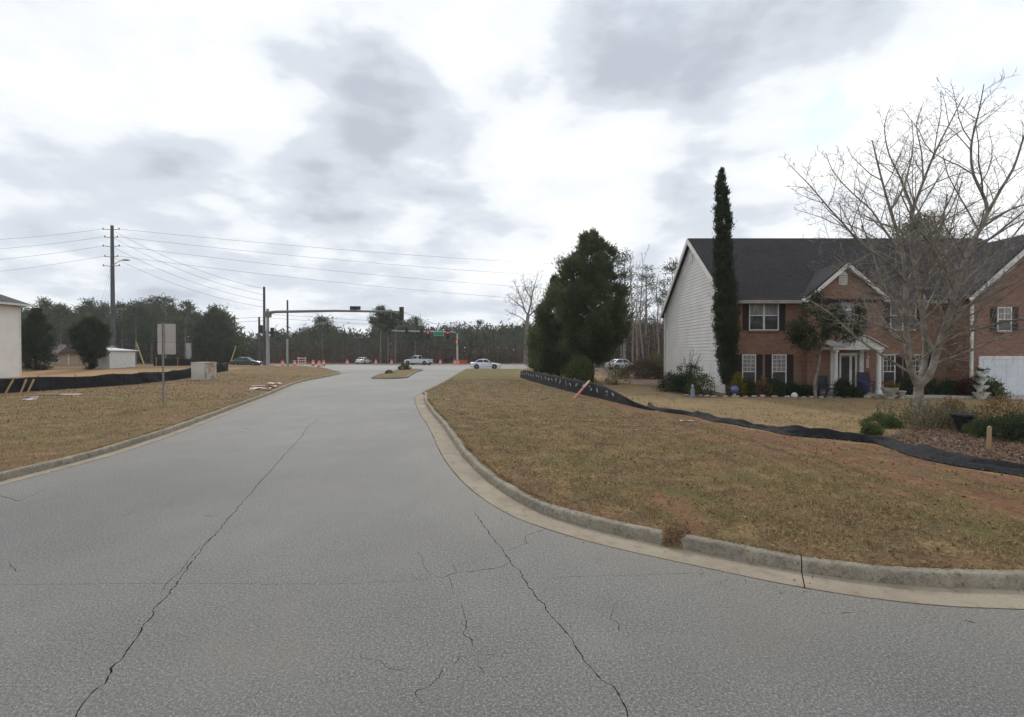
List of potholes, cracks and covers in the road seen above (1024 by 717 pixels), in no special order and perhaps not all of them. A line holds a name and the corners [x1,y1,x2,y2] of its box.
crack [10,420,405,717]
crack [411,514,628,717]
